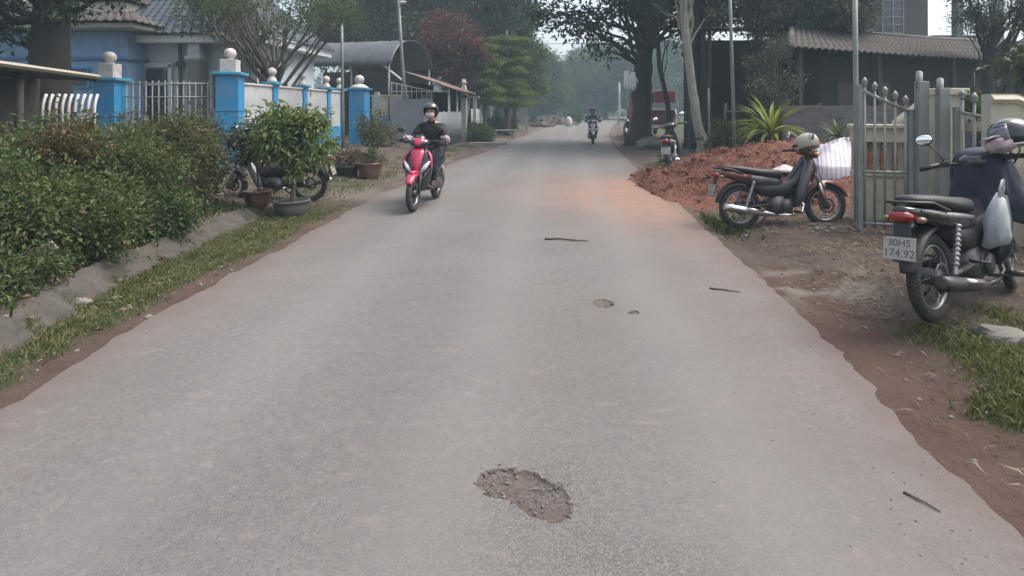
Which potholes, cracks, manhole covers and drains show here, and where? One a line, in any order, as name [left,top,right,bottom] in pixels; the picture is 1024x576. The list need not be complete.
pothole [592,298,617,308]
pothole [474,463,578,524]
